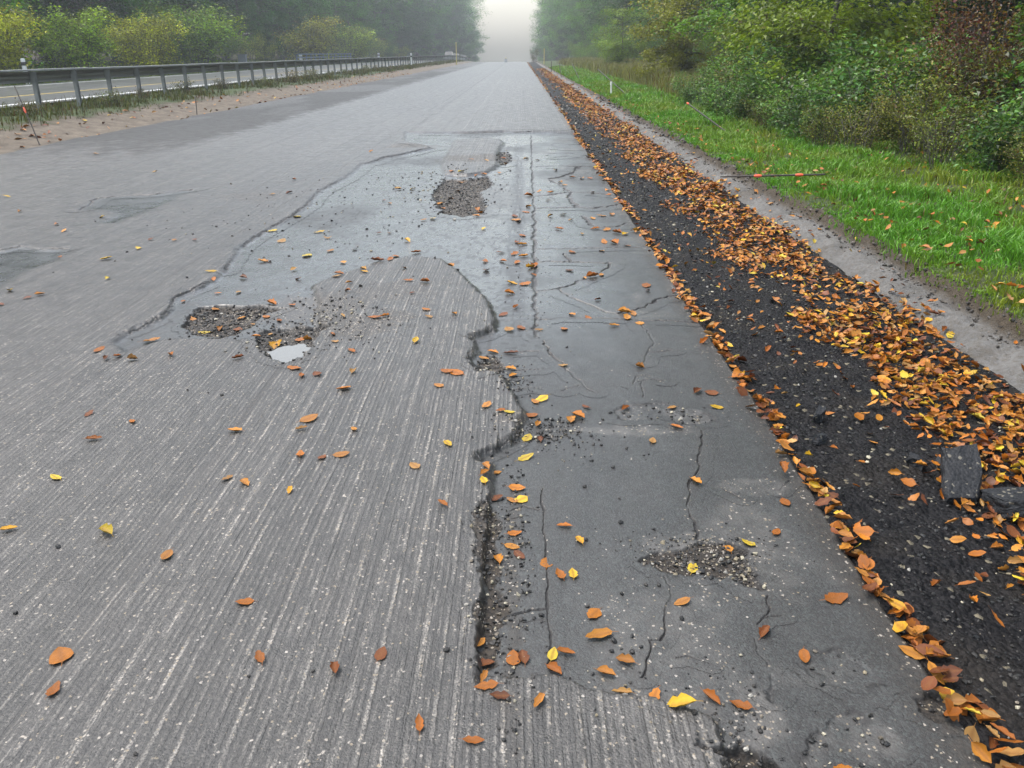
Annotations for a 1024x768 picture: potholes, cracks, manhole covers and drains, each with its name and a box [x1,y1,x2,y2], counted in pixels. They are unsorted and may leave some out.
pothole [236,317,347,369]
pothole [167,300,295,340]
crack [63,128,701,404]
crack [473,417,537,462]
crack [626,569,798,689]
pothole [417,175,508,220]
pothole [626,530,786,602]
crack [672,424,804,549]
crack [497,481,566,676]
